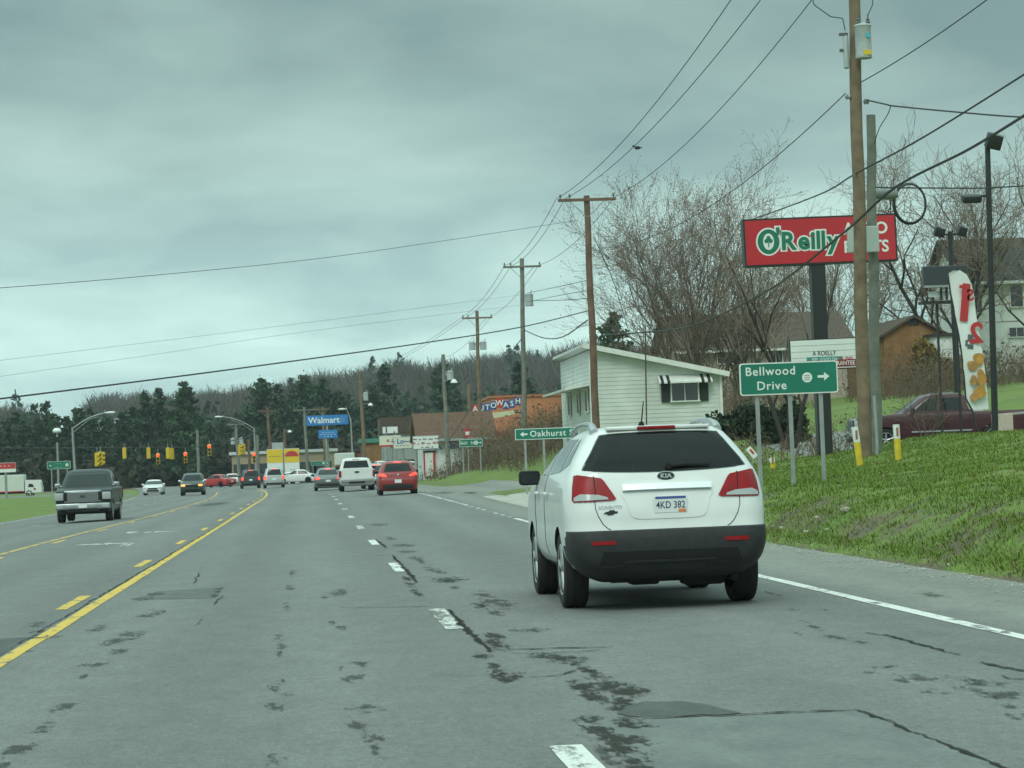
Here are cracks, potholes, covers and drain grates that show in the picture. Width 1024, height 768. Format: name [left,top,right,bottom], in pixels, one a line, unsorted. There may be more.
crack [349,704,395,758]
crack [403,576,424,607]
crack [864,661,1024,719]
crack [576,734,620,765]
crack [436,604,601,676]
crack [340,662,367,683]
crack [643,709,1007,768]
